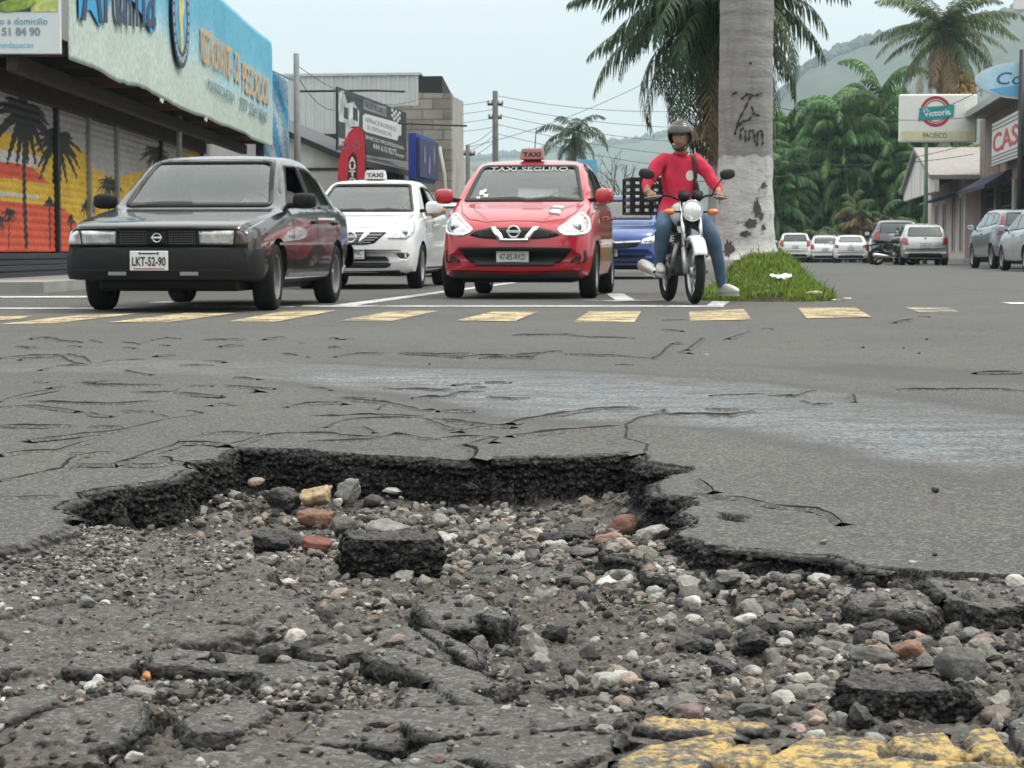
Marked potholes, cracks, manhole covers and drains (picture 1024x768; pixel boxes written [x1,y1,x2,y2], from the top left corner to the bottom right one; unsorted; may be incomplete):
crack [328,319,706,366]
pothole [0,446,1024,768]
crack [690,478,858,527]
crack [723,328,772,339]
crack [0,336,858,500]
